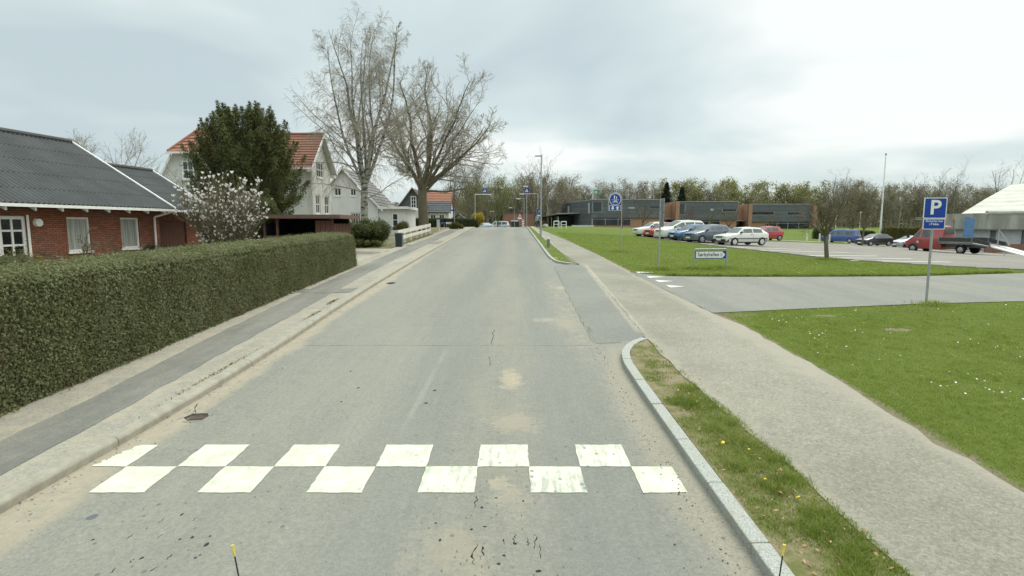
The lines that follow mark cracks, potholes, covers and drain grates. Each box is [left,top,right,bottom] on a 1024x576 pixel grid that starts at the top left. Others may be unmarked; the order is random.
crack [309,331,552,365]
manhole cover [184,413,209,421]
